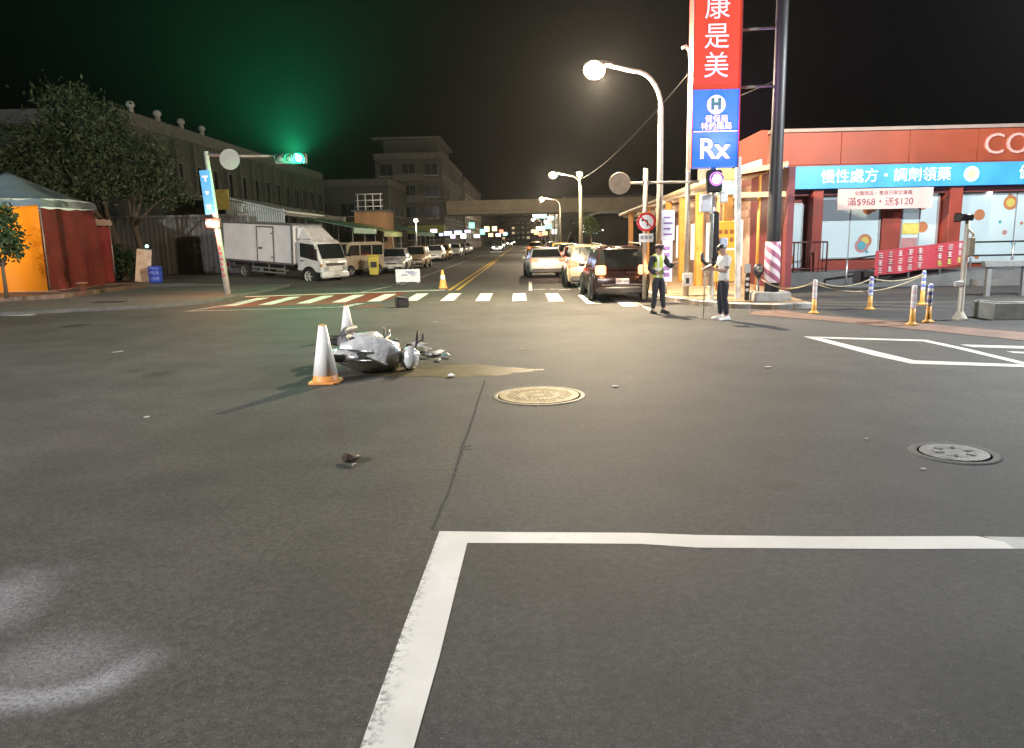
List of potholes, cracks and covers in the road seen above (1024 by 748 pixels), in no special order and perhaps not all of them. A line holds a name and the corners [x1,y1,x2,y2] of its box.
crack [429,381,486,530]
manhole cover [908,442,1003,466]
manhole cover [492,386,586,406]
